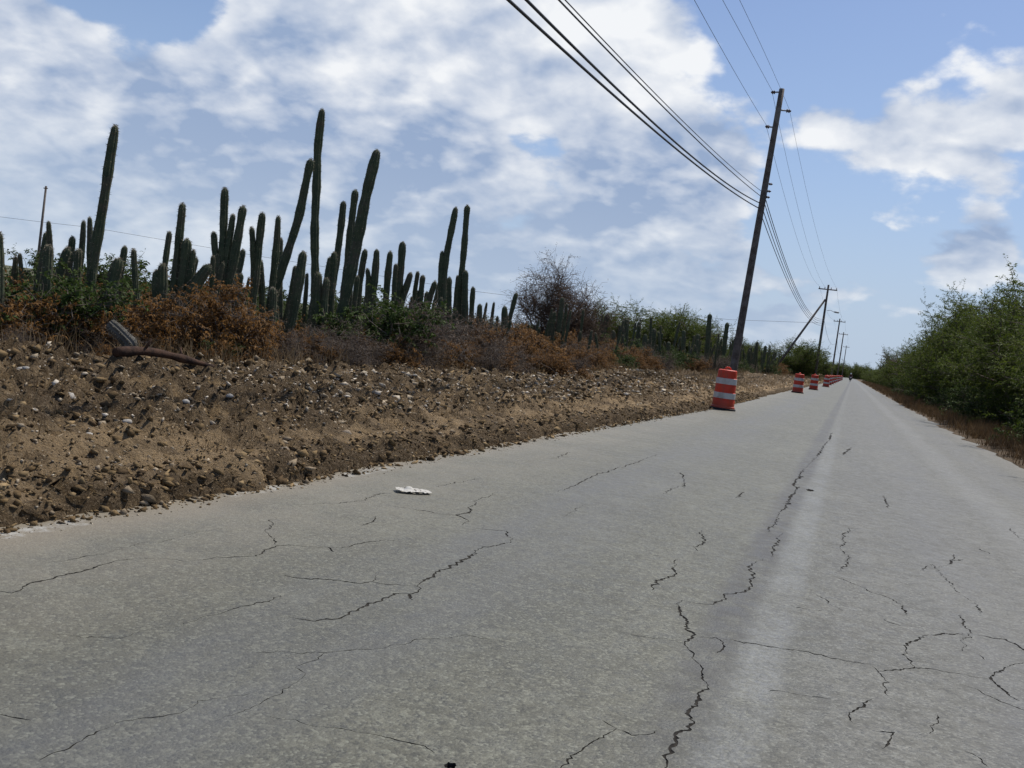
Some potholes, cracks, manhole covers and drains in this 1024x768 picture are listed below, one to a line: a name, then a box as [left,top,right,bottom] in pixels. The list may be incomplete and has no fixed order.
crack [285,529,512,621]
crack [339,479,491,525]
crack [1,520,381,593]
crack [42,635,475,759]
crack [840,529,1024,722]
crack [560,531,863,768]
